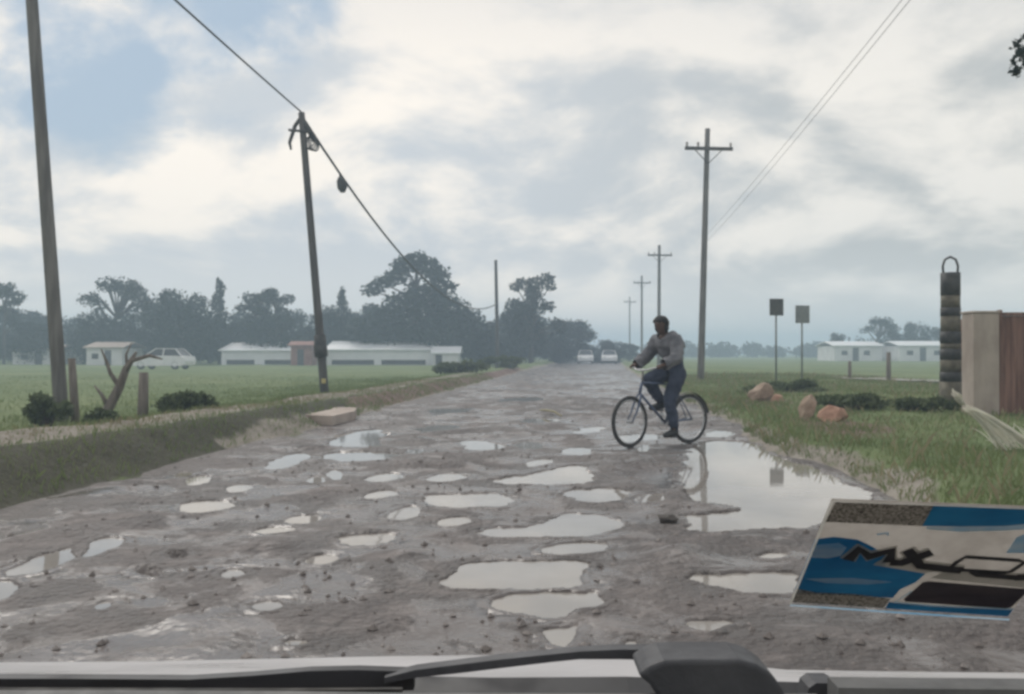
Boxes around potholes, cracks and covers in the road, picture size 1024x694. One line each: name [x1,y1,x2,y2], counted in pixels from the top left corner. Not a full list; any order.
pothole [554,486,641,505]
pothole [327,530,407,548]
pothole [661,440,888,533]
pothole [315,450,411,462]
pothole [476,586,615,622]
pothole [479,464,605,487]
pothole [467,512,631,539]
pothole [677,568,802,597]
pothole [447,439,511,451]
pothole [318,428,399,447]
pothole [78,534,135,559]
pothole [0,543,82,578]
